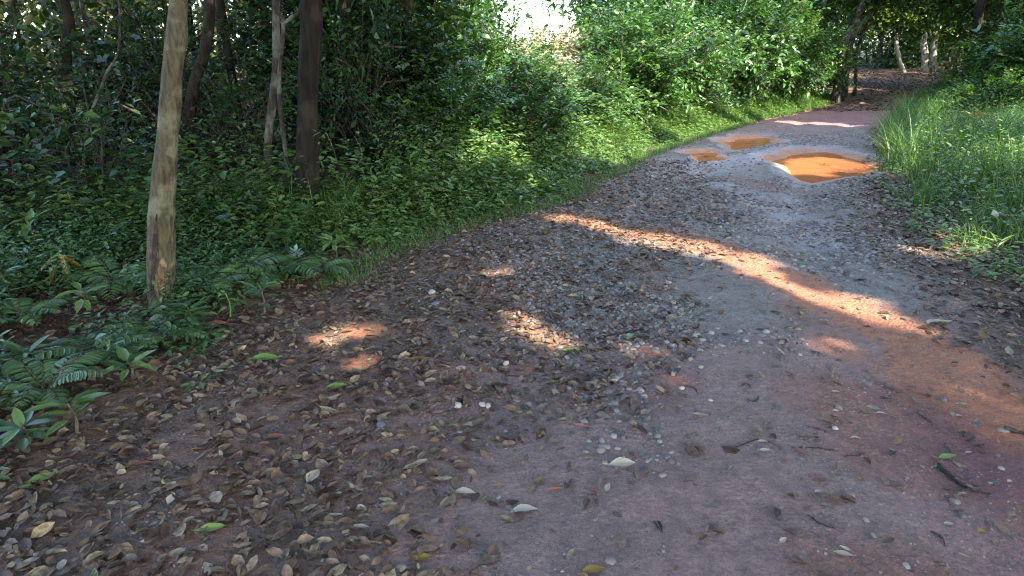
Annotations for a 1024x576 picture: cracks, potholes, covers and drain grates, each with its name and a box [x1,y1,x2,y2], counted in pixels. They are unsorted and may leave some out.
pothole [707,132,793,151]
pothole [741,144,909,190]
pothole [672,147,737,162]
